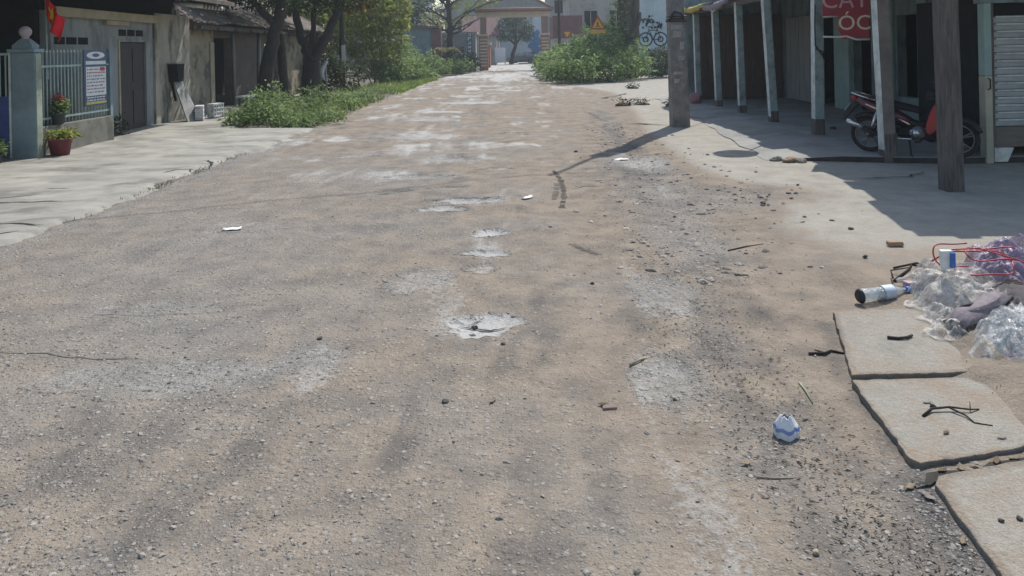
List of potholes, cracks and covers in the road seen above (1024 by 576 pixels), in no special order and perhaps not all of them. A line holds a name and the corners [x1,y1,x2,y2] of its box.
crack [3,352,148,360]
pothole [469,227,513,238]
pothole [425,197,511,205]
pothole [452,249,515,257]
pothole [443,311,534,340]
pothole [409,204,475,213]
